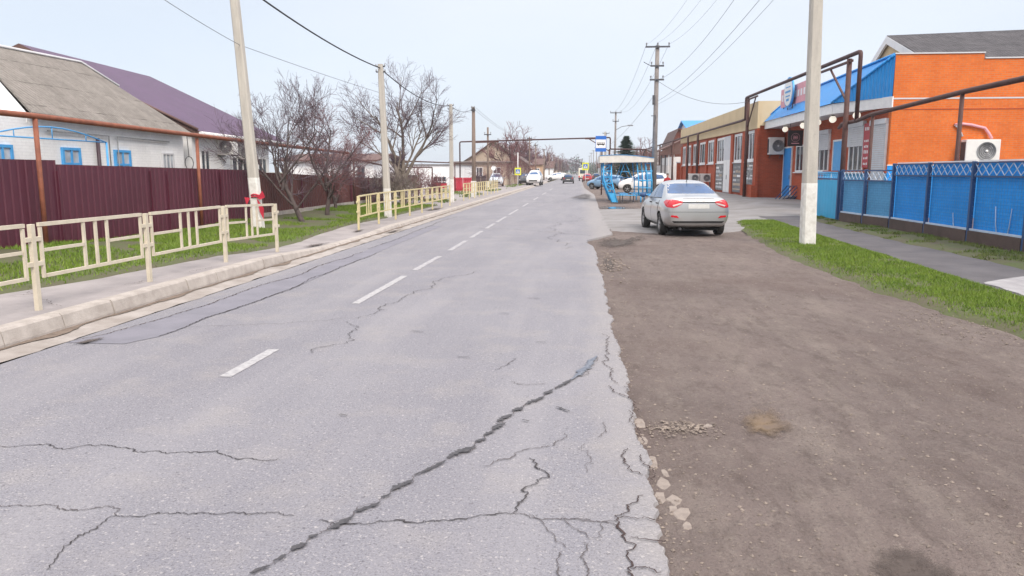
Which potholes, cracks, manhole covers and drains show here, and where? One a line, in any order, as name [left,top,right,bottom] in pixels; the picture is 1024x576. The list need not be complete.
crack [72,219,447,353]
crack [487,337,666,576]
crack [0,504,294,569]
crack [3,444,277,461]
